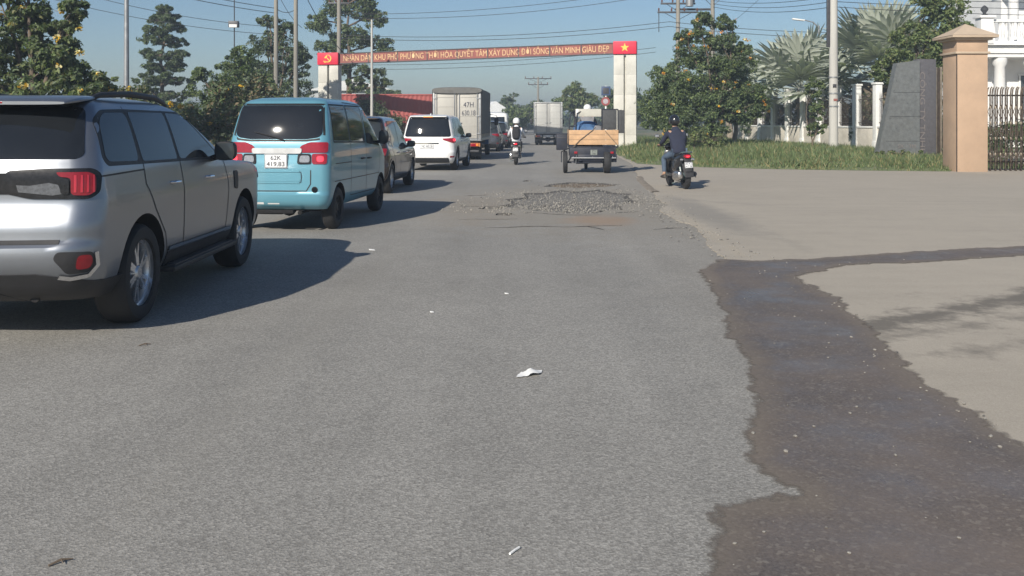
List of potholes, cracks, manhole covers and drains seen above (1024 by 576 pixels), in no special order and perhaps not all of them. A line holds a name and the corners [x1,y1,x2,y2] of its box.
pothole [437,188,674,214]
